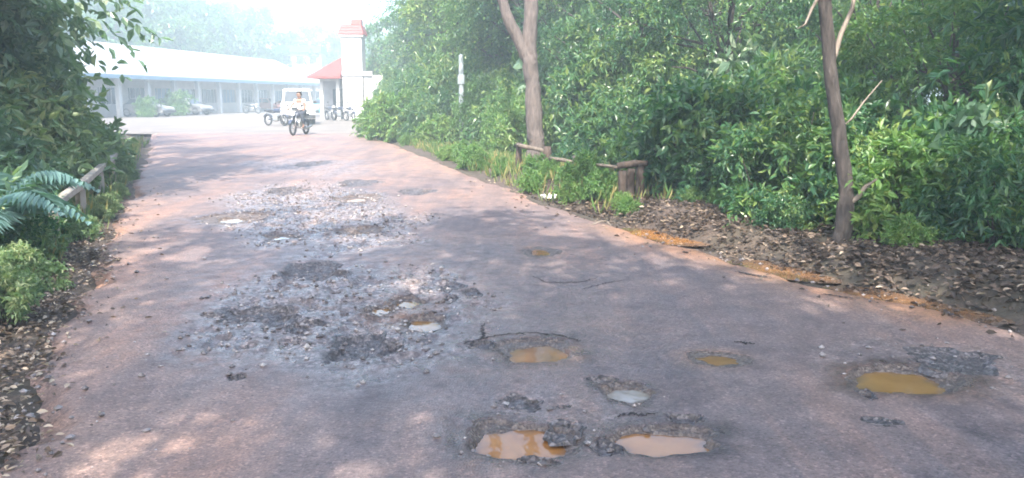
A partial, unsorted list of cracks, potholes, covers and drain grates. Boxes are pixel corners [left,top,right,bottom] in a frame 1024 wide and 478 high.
pothole [337,179,386,187]
pothole [333,194,383,203]
pothole [199,305,301,327]
pothole [605,423,721,458]
pothole [686,351,755,368]
pothole [389,294,428,310]
pothole [261,234,300,242]
pothole [520,246,563,258]
pothole [265,186,310,196]
pothole [191,211,271,225]
pothole [280,317,329,336]
pothole [364,302,397,319]
